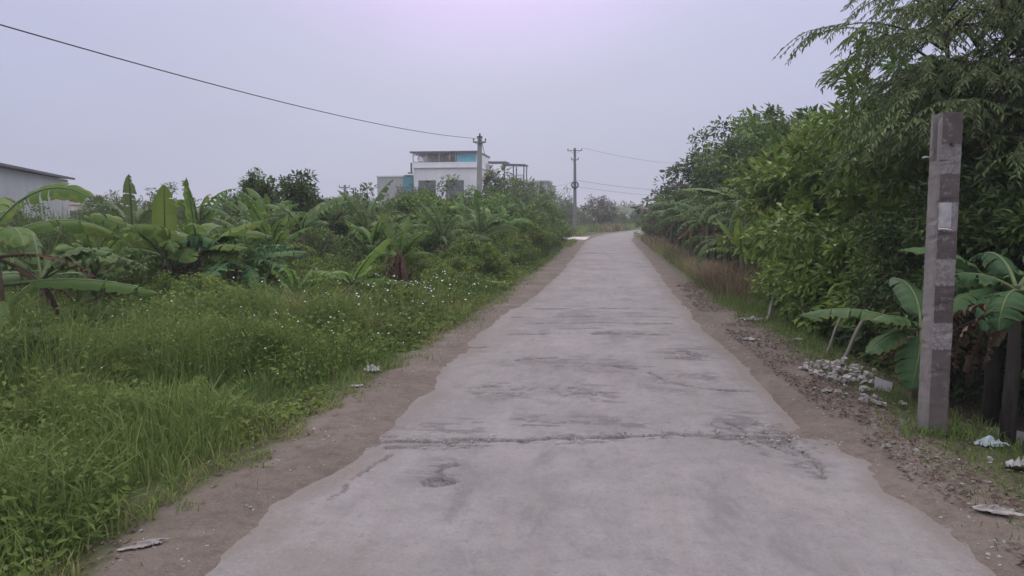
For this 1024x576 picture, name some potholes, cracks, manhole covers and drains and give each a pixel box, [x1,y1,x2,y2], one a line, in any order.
crack [325,422,843,501]
crack [468,307,757,393]
pothole [418,462,465,488]
